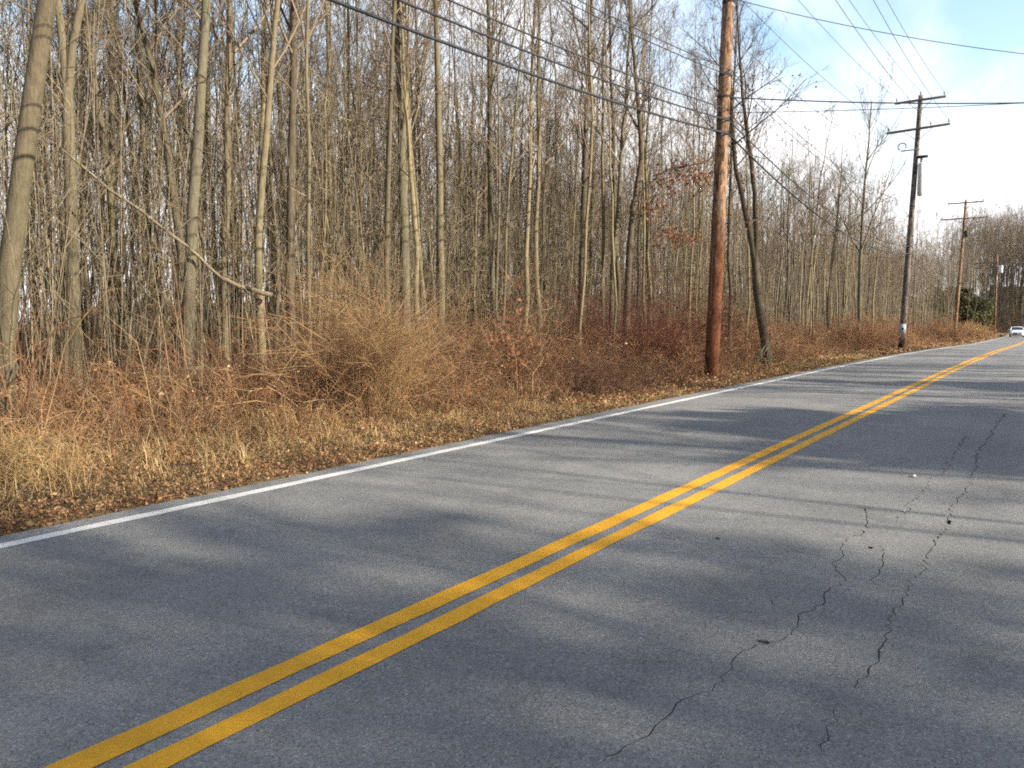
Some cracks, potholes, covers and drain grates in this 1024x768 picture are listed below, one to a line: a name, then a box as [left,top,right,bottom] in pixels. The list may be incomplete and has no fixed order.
crack [819,413,1008,751]
crack [600,508,884,764]
